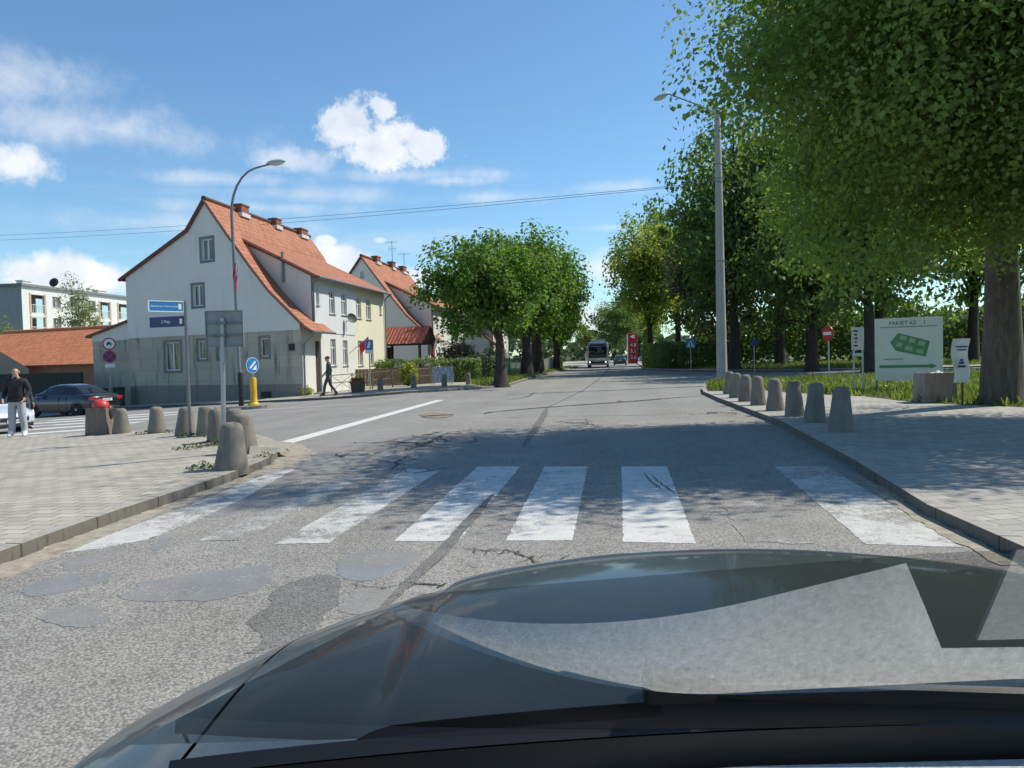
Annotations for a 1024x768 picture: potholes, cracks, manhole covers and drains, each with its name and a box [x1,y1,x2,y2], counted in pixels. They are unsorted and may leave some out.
crack [308,429,476,473]
crack [463,547,570,563]
